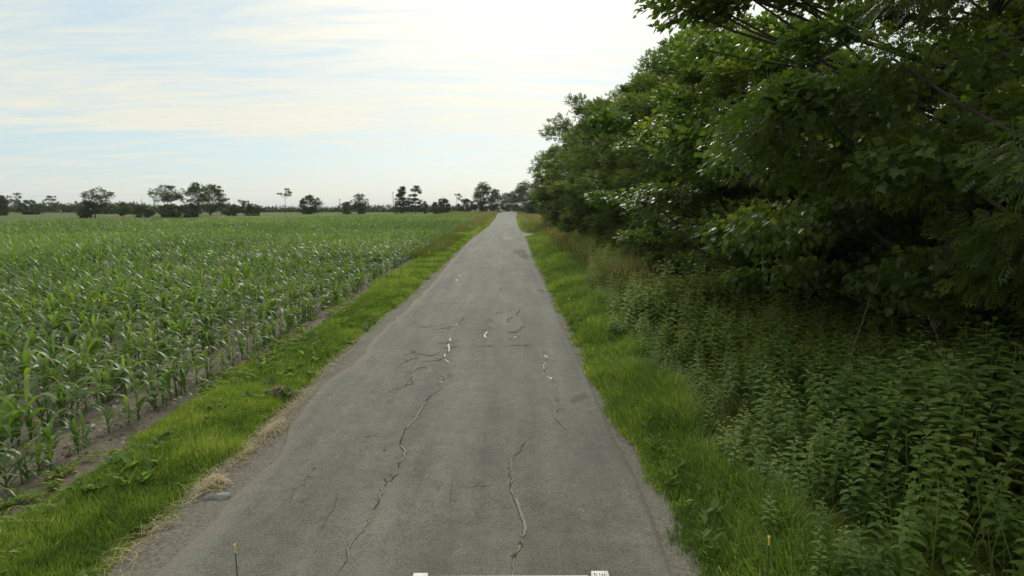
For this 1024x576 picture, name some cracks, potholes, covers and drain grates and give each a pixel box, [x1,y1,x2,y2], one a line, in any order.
crack [448,435,537,576]
crack [319,304,464,576]
crack [478,310,578,438]
